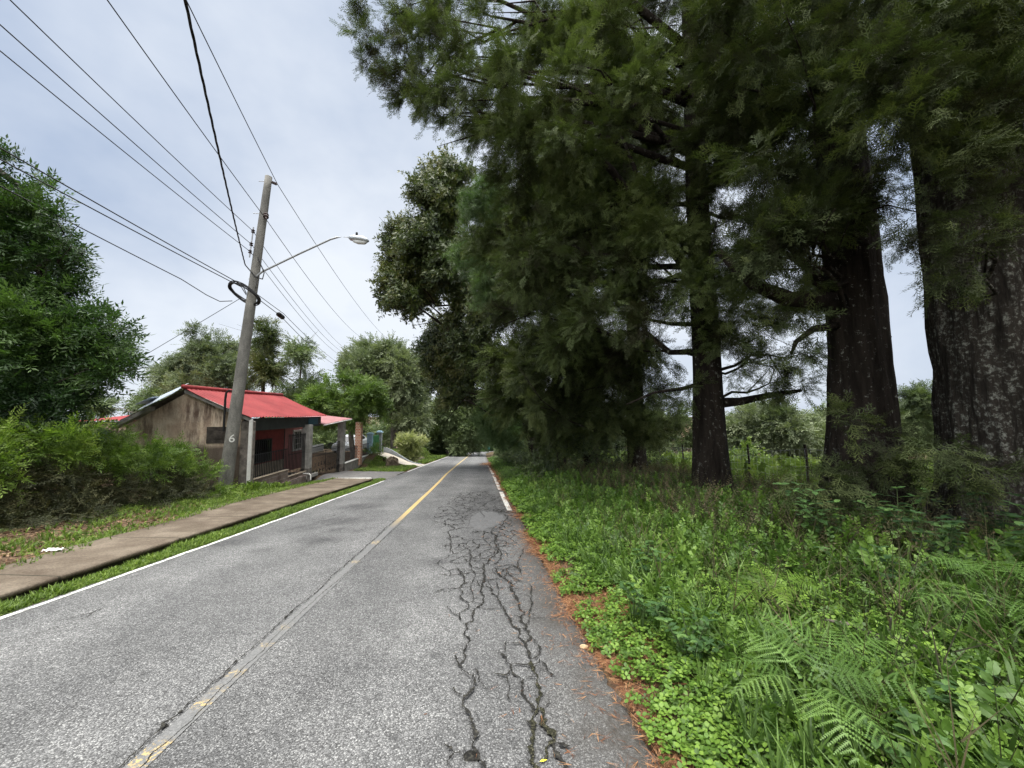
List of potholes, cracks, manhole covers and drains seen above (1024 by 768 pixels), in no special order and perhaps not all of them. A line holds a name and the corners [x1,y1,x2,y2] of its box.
crack [433,491,571,768]
